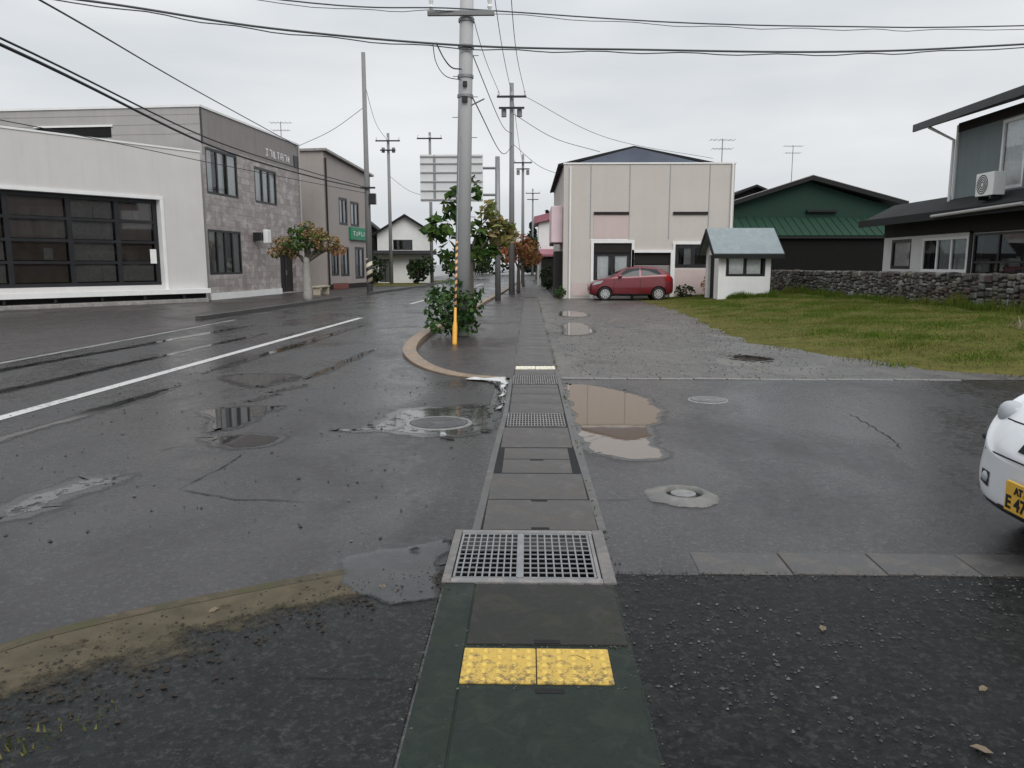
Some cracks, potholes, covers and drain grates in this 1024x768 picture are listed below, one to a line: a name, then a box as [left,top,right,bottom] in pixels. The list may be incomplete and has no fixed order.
manhole cover [644,485,720,508]
manhole cover [405,416,472,430]
drain grate [513,375,558,384]
crack [179,454,290,501]
manhole cover [687,396,729,404]
pothole [726,354,775,363]
drain grate [441,529,617,585]
drain grate [507,413,566,427]
